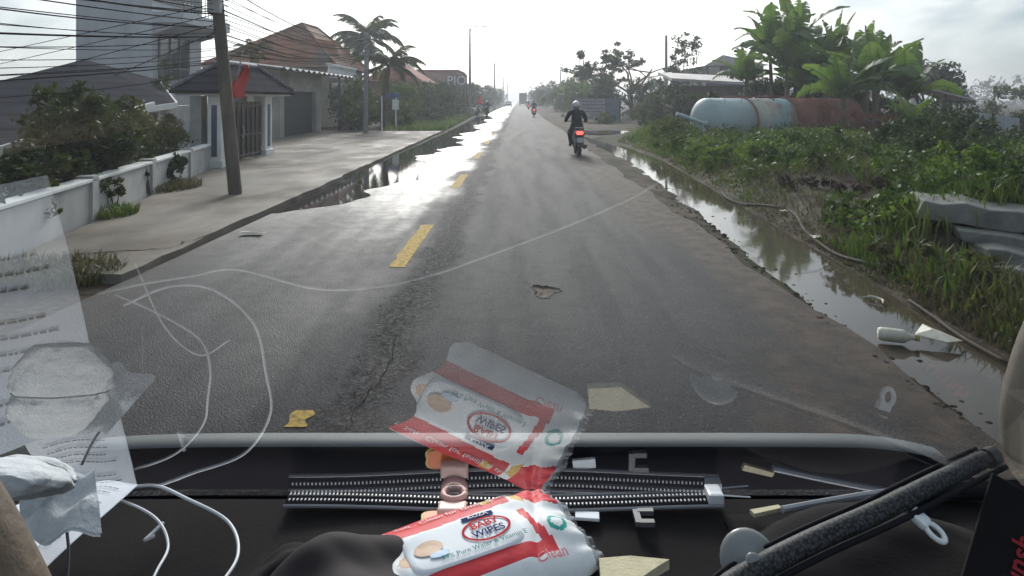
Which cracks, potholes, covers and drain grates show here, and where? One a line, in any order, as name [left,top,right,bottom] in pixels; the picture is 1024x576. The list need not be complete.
pothole [530,284,563,298]
